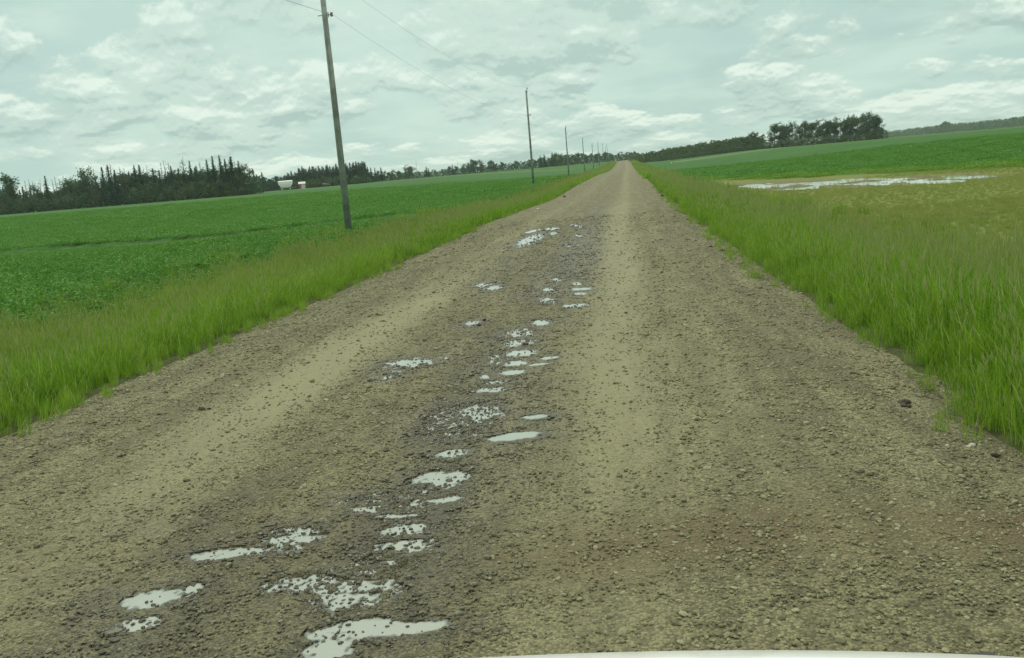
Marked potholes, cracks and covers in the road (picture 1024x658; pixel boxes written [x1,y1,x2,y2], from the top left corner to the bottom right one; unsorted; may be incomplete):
pothole [405,397,514,449]
pothole [244,563,426,617]
pothole [499,359,532,368]
pothole [286,612,480,658]
pothole [482,350,505,368]
pothole [508,231,551,250]
pothole [158,521,336,564]
pothole [478,378,517,388]
pothole [363,519,443,540]
pothole [493,327,546,339]
pothole [371,356,447,372]
pothole [489,369,535,377]
